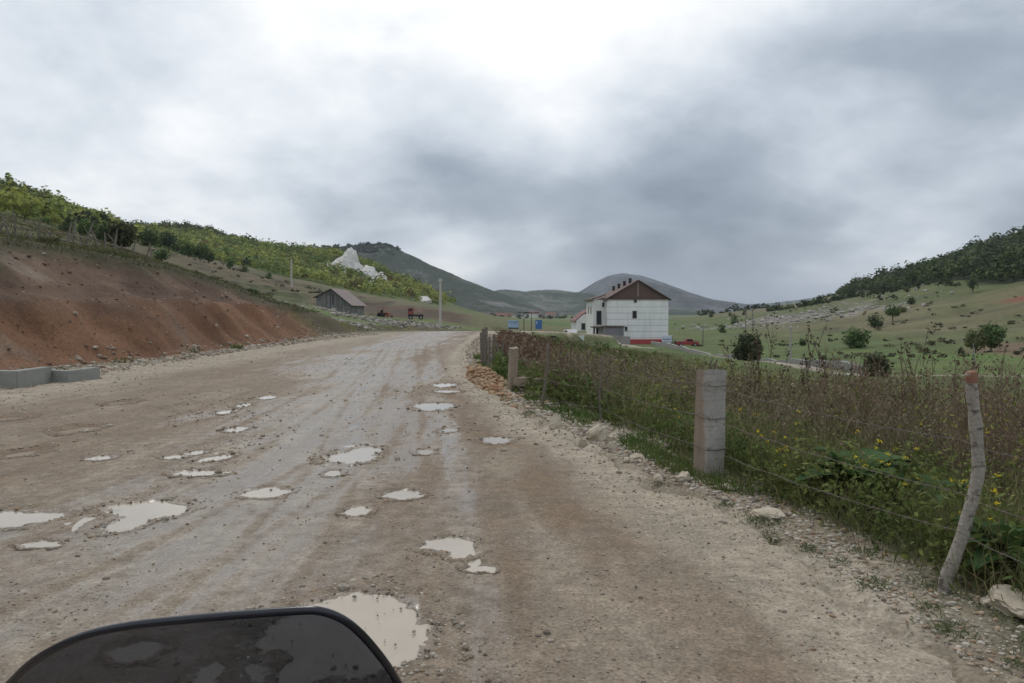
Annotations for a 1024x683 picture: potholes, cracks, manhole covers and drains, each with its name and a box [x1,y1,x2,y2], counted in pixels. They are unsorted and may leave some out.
pothole [407,531,494,562]
pothole [456,554,500,575]
pothole [187,452,241,463]
pothole [404,401,468,412]
pothole [335,503,380,519]
pothole [230,485,301,500]
pothole [319,469,351,478]
pothole [473,435,518,446]
pothole [154,468,236,479]
pothole [154,449,212,461]
pothole [260,577,477,677]
pothole [308,445,389,466]
